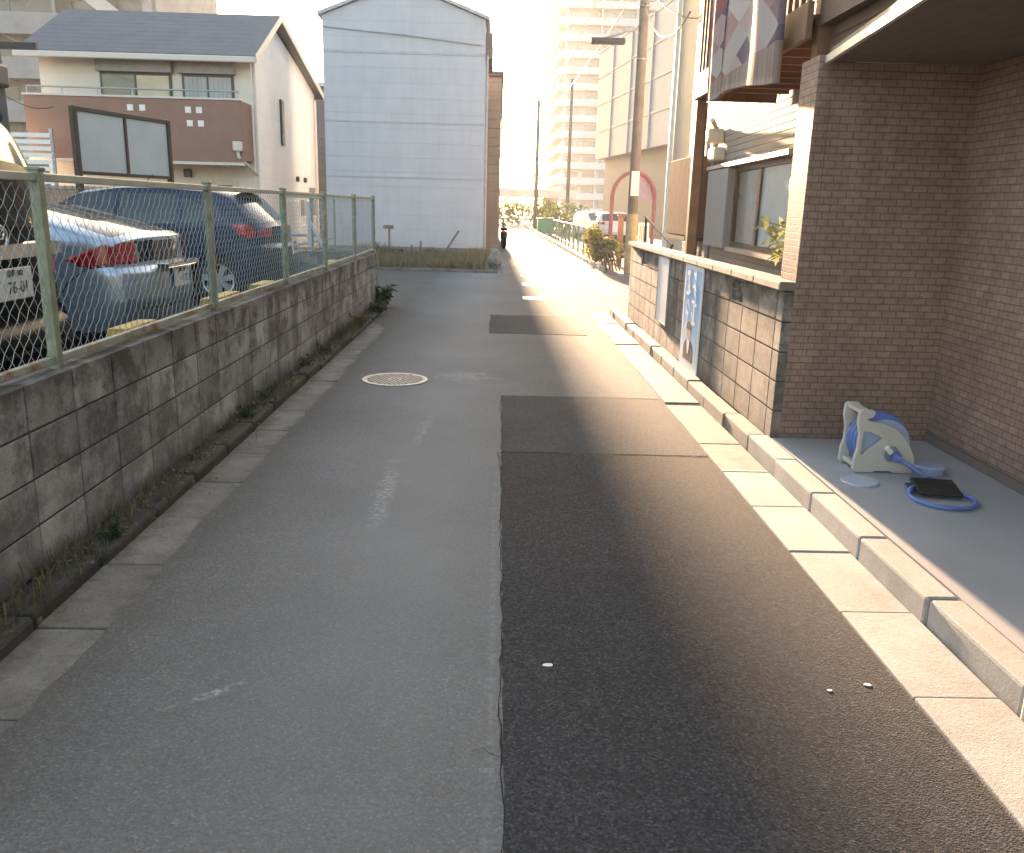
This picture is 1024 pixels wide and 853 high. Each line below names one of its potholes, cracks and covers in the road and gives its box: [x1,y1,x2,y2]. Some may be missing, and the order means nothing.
manhole cover [362,373,428,386]
